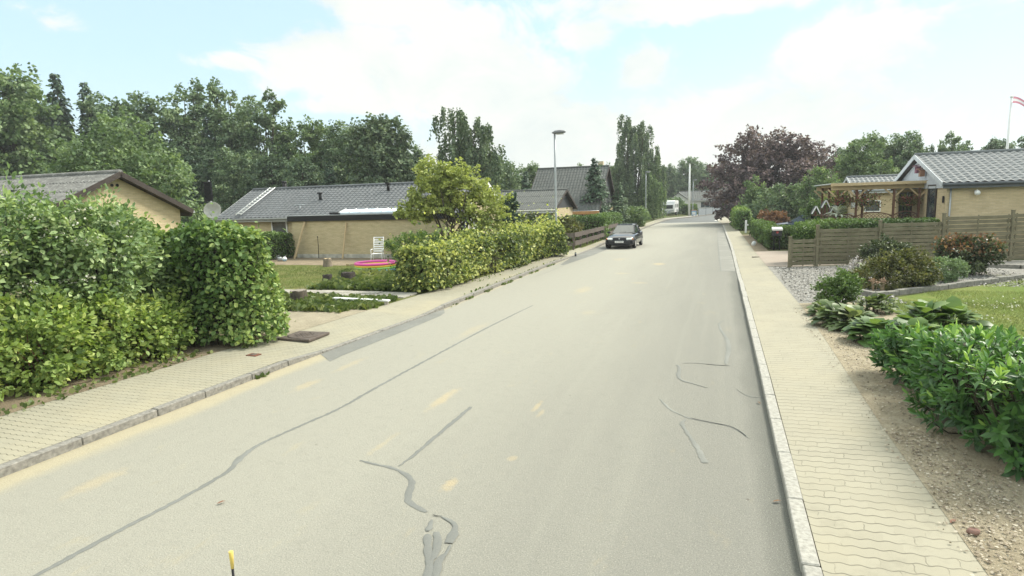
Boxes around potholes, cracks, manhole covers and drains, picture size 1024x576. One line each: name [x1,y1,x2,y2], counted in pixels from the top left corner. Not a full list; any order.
manhole cover [278,331,330,342]
